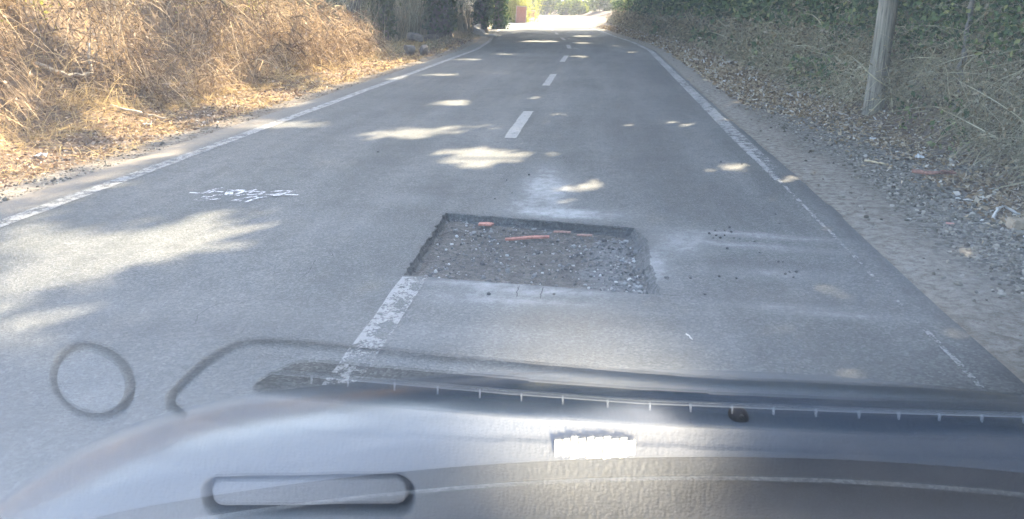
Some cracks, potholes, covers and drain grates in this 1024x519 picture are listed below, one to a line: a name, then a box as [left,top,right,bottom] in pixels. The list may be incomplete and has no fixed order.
pothole [404,213,662,295]
